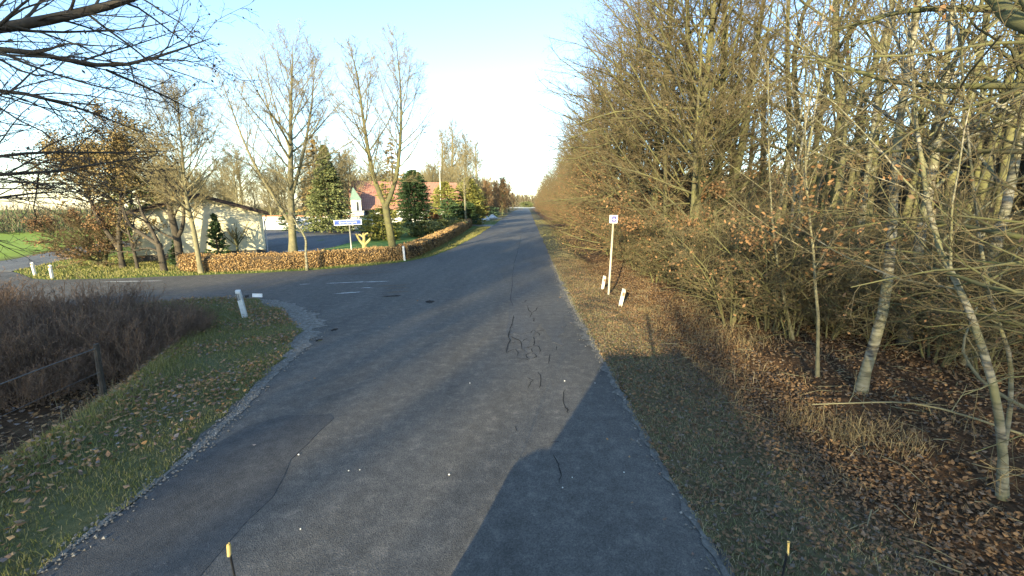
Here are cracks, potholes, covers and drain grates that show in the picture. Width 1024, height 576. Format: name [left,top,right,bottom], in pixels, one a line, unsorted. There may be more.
crack [506,238,557,388]
